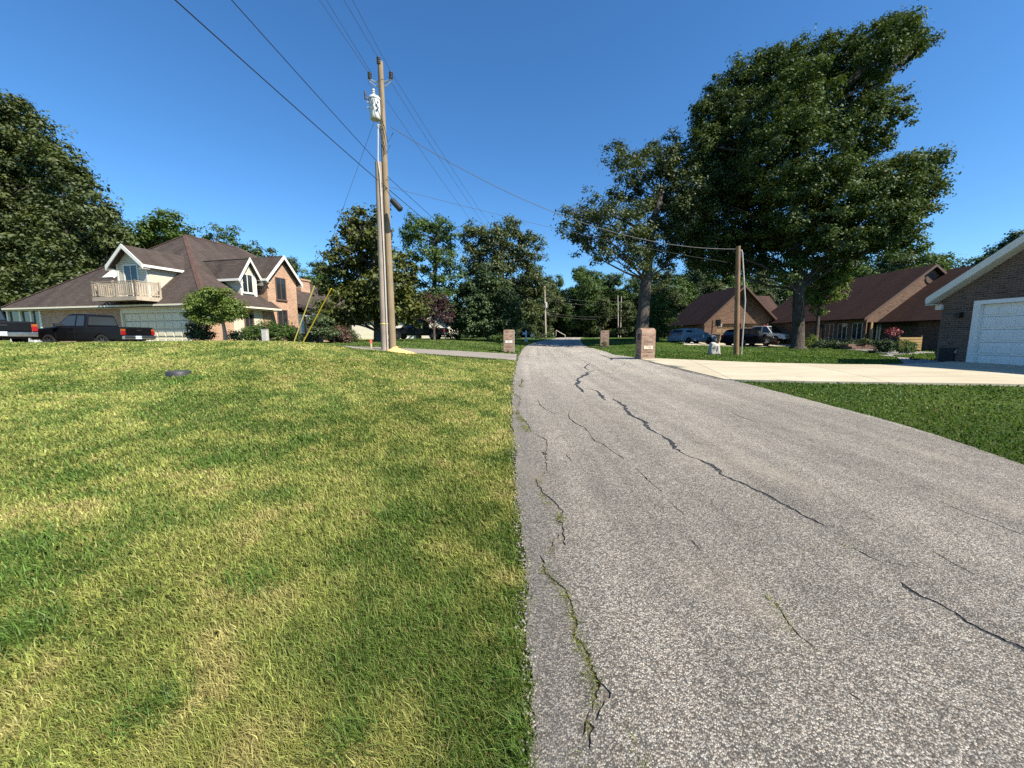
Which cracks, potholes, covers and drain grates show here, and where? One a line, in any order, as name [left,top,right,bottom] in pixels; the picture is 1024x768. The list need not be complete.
crack [778,605,864,702]
crack [513,378,702,749]
